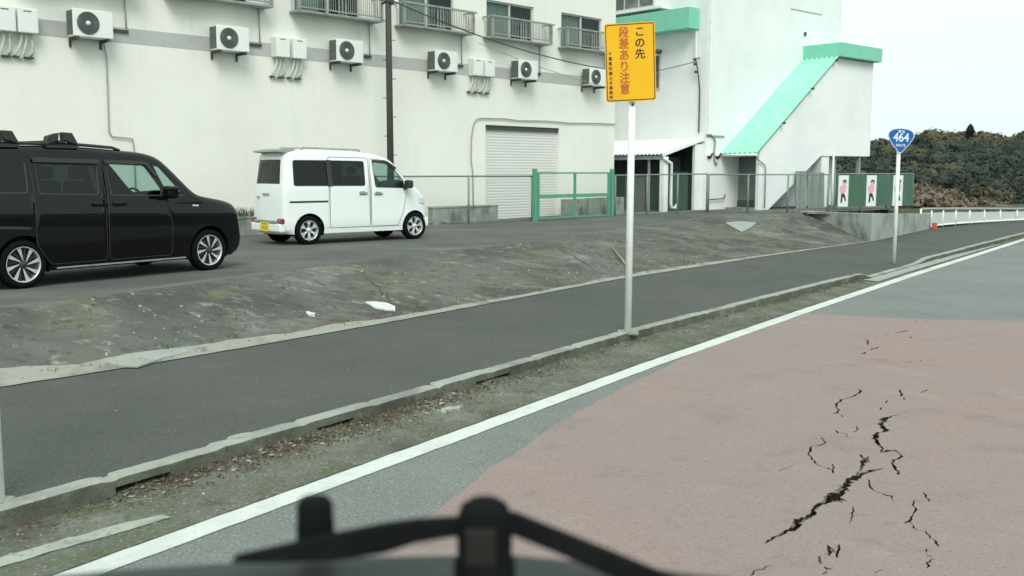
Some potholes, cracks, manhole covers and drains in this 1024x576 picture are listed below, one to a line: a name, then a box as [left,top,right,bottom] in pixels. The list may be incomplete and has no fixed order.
crack [765,389,939,574]
